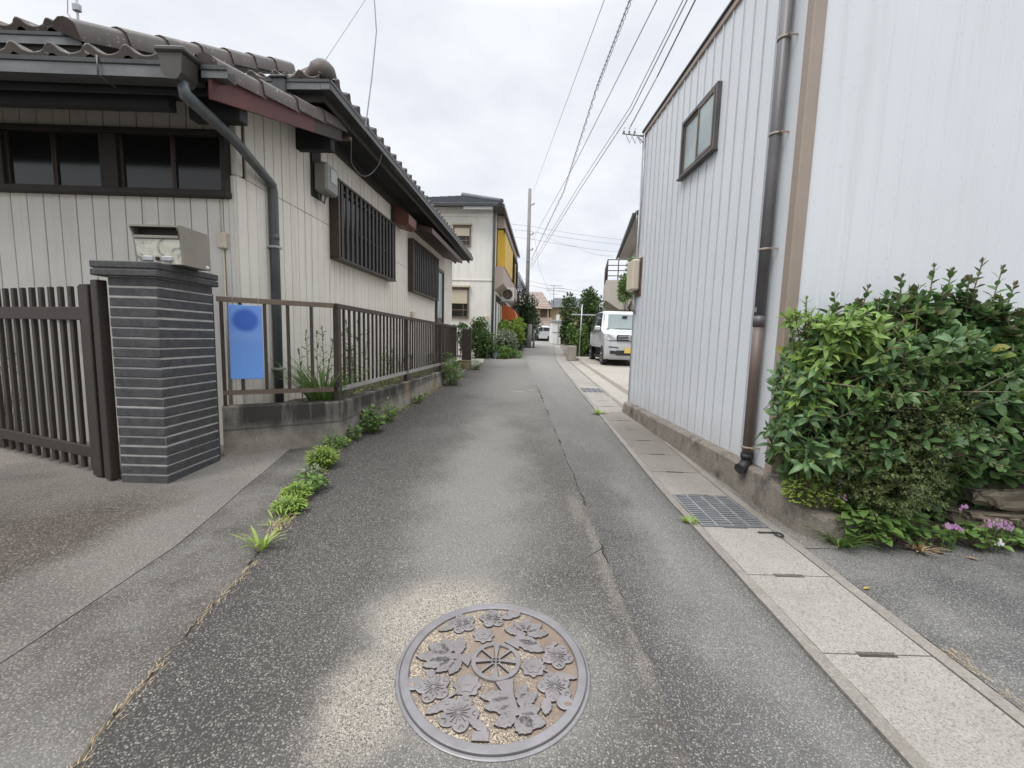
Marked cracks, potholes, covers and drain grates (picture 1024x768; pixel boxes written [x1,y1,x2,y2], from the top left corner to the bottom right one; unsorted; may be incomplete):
crack [538,389,651,661]
drain grate [673,495,767,529]
manhole cover [395,603,591,763]
